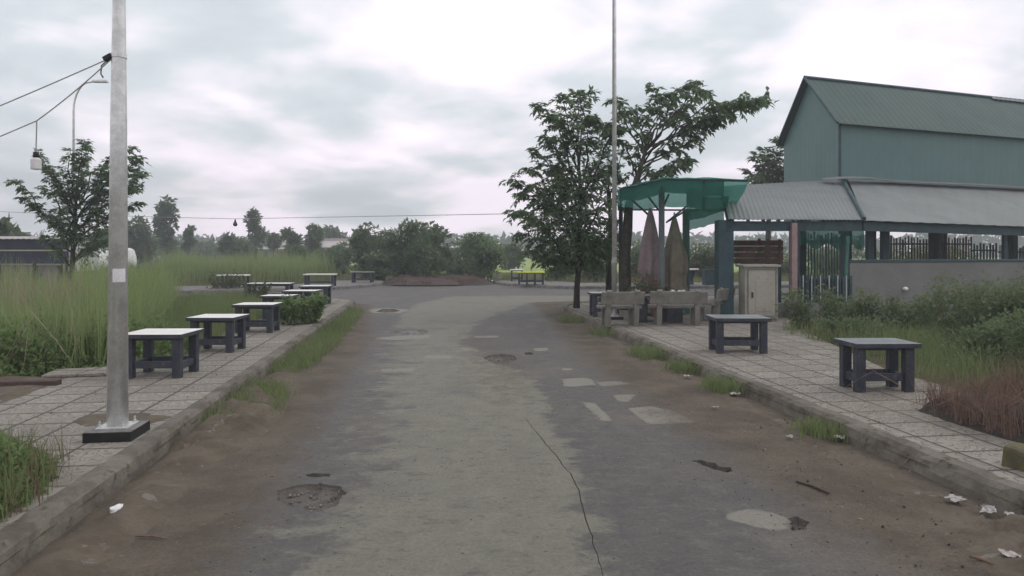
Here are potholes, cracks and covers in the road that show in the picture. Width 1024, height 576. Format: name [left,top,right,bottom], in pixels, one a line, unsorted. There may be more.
pothole [693,460,732,472]
pothole [483,354,517,364]
pothole [277,483,347,512]
crack [527,421,603,575]
